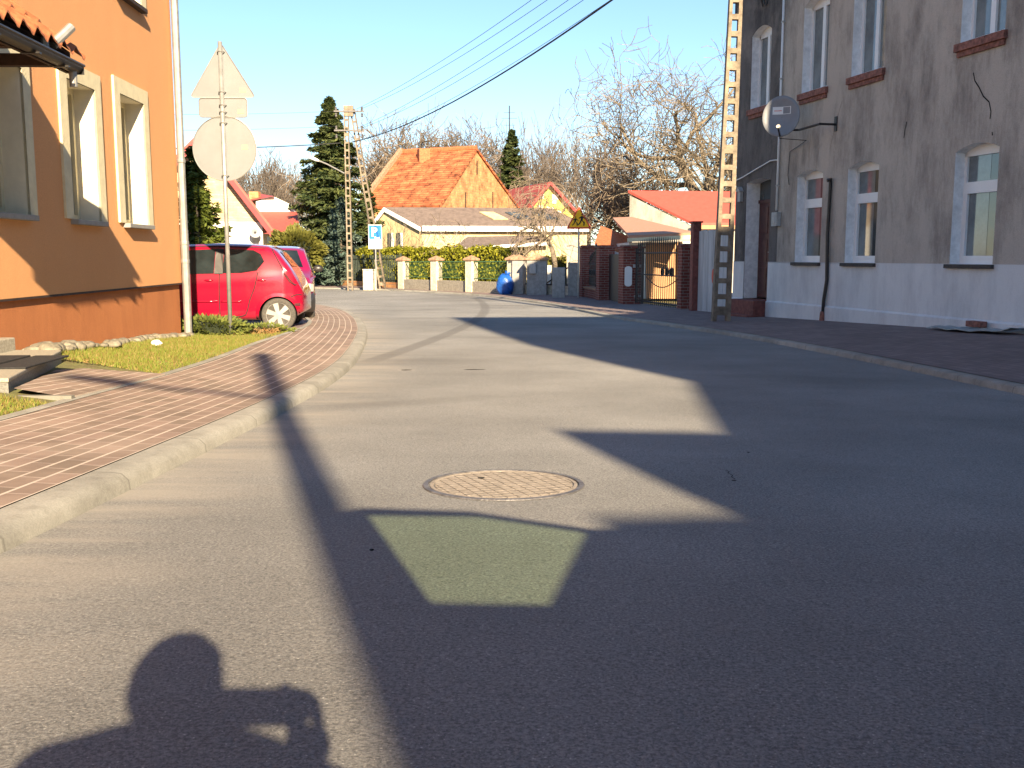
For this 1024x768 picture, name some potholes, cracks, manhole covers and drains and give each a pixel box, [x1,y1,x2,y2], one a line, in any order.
manhole cover [422,469,585,501]
